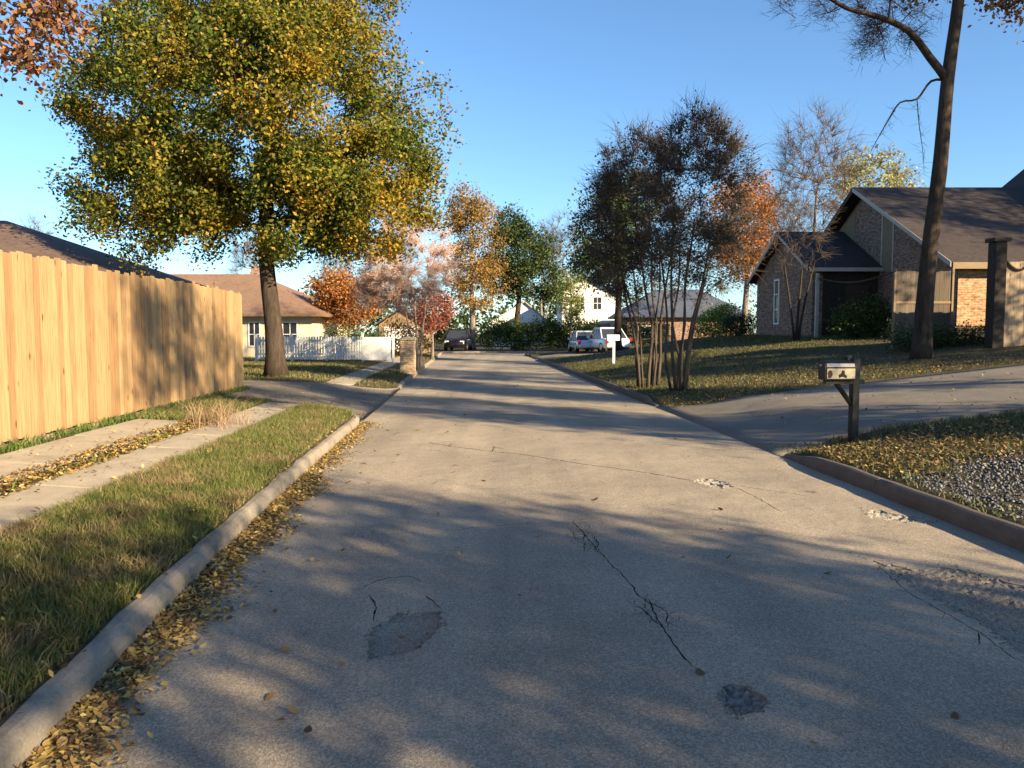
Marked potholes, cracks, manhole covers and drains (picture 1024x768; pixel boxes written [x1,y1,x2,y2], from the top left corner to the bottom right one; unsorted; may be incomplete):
pothole [859,507,937,524]
crack [364,576,440,621]
pothole [716,683,771,720]
crack [377,520,694,667]
crack [429,442,687,480]
crack [879,566,1021,661]
pothole [694,478,734,489]
pothole [363,606,450,662]
